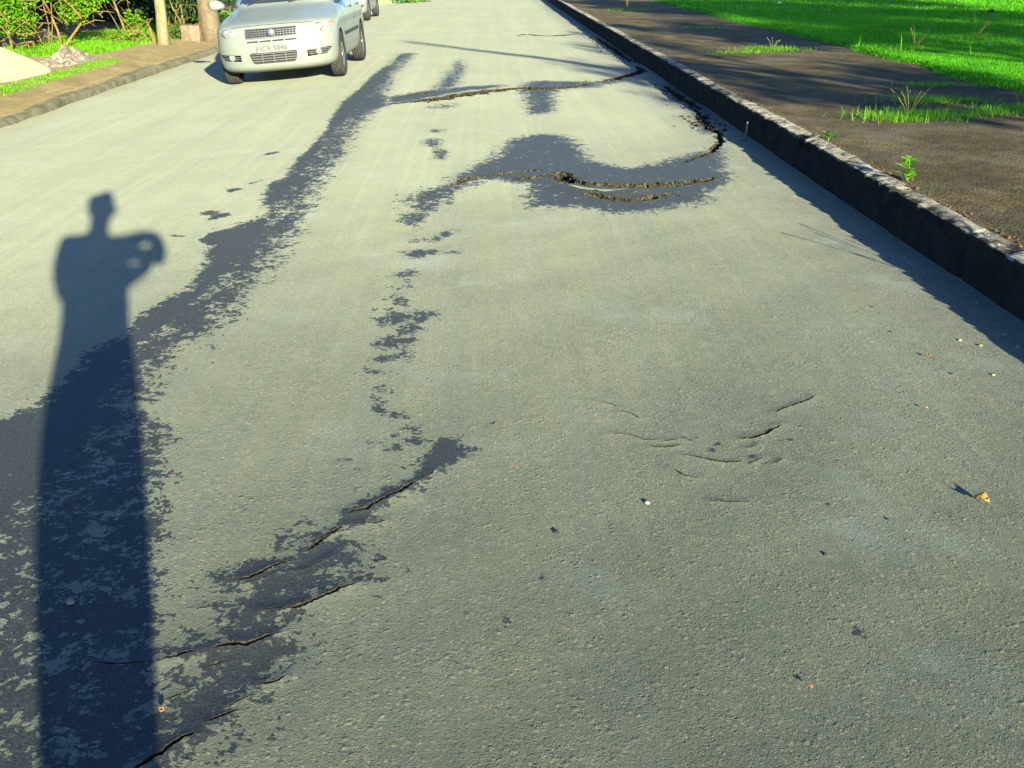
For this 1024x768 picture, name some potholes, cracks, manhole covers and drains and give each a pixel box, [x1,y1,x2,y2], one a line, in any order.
crack [92,469,435,768]
crack [386,37,726,202]
crack [600,395,814,502]
